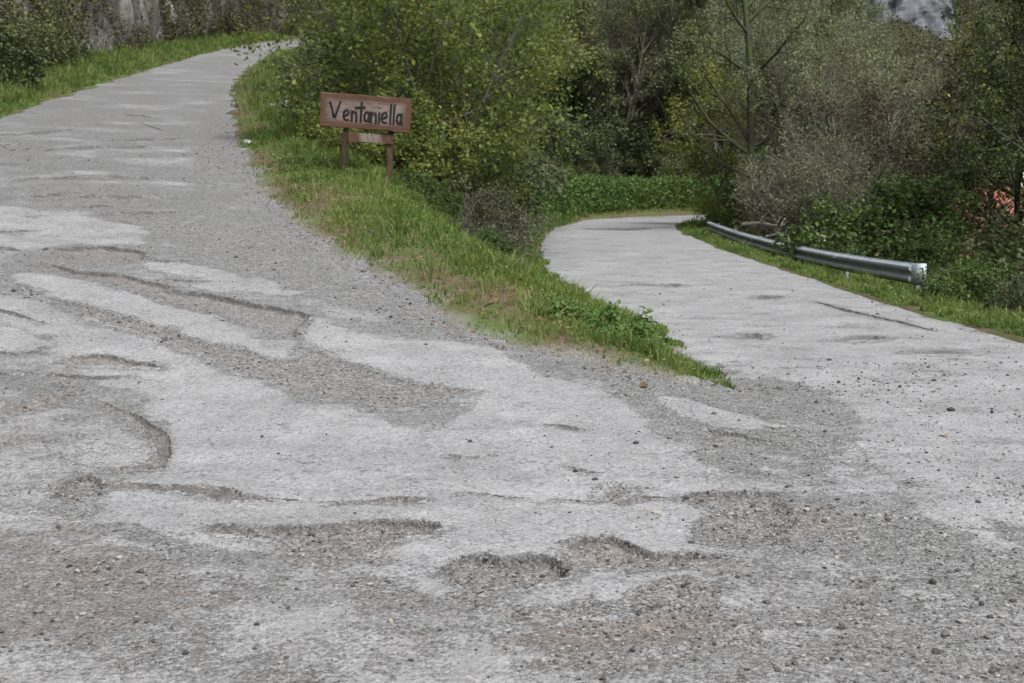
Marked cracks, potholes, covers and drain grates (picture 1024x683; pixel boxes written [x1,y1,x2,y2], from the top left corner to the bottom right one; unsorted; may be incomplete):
pothole [565,535,726,572]
pothole [438,552,571,597]
pothole [5,280,482,410]
pothole [54,475,106,499]
crack [814,301,937,332]
pothole [680,491,800,548]
pothole [205,518,447,556]
